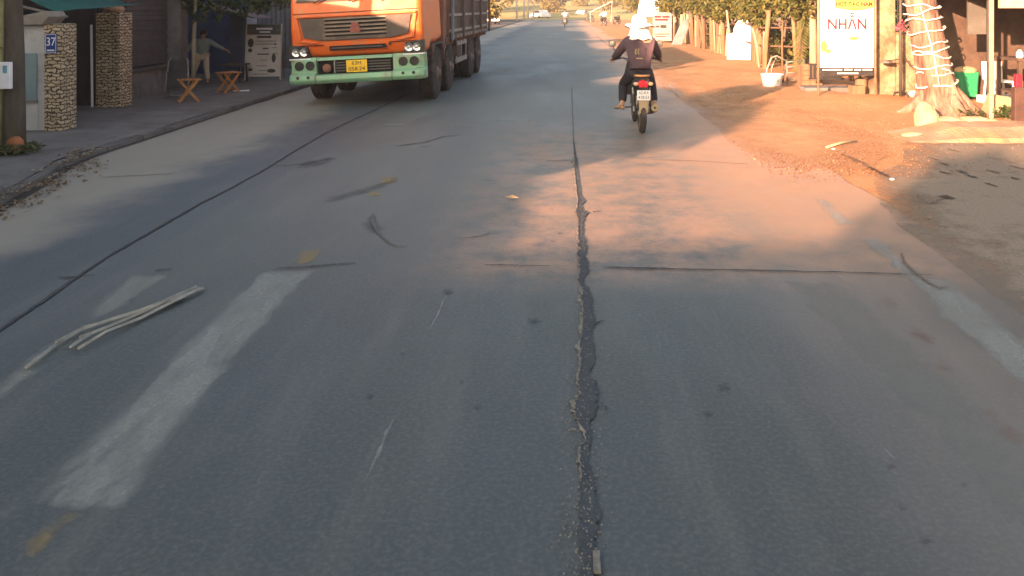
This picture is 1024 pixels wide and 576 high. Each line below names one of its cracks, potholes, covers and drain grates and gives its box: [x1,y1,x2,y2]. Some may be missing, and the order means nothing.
crack [901,253,950,288]
crack [551,88,613,576]
